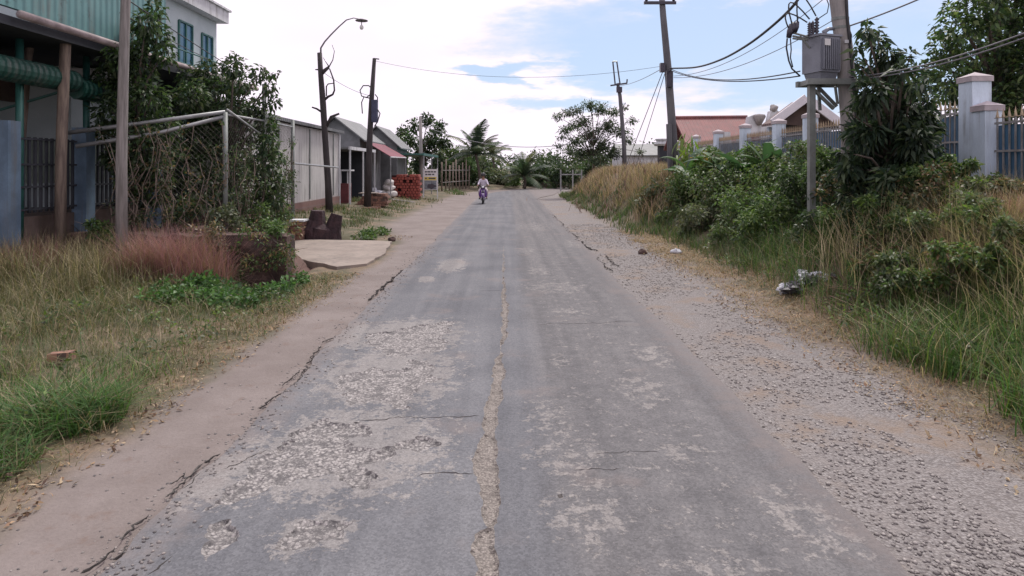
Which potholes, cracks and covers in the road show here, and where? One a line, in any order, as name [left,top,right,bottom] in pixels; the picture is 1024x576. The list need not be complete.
pothole [334,321,455,410]
pothole [201,519,239,562]
pothole [274,519,356,552]
crack [580,451,657,470]
crack [80,450,266,575]
crack [553,216,620,271]
pothole [202,417,442,512]
crack [259,335,336,409]
crack [354,246,509,576]
